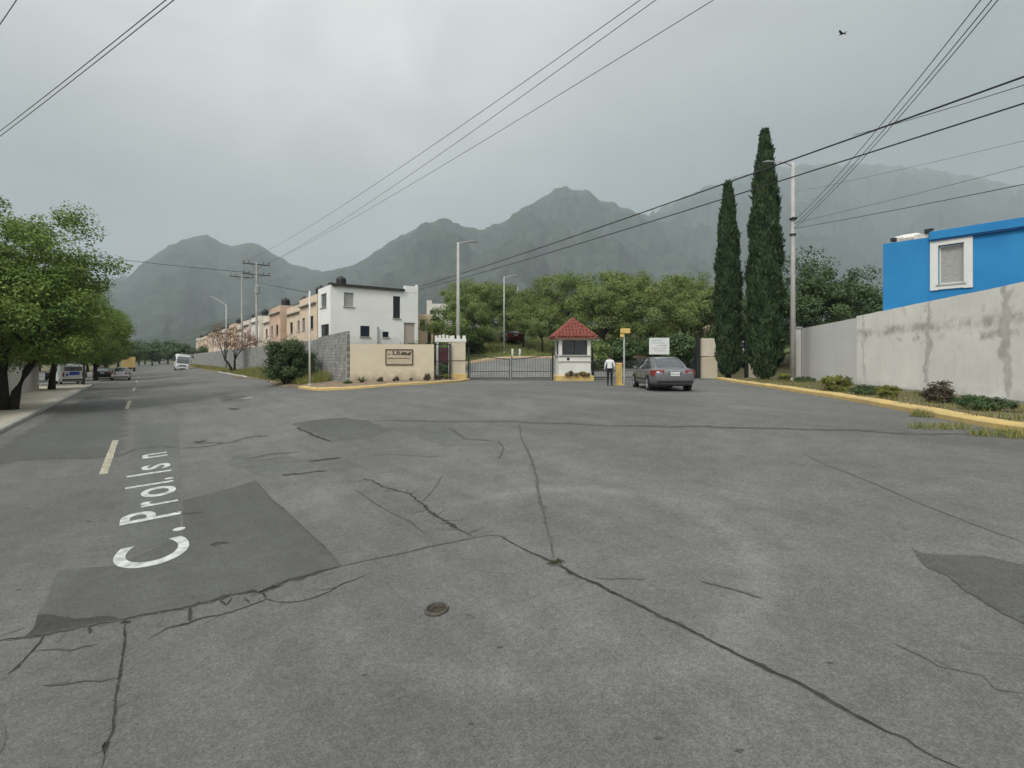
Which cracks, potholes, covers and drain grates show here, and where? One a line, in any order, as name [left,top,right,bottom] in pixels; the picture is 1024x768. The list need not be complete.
crack [0,566,365,686]
manhole cover [425,602,449,617]
crack [347,423,1024,768]
